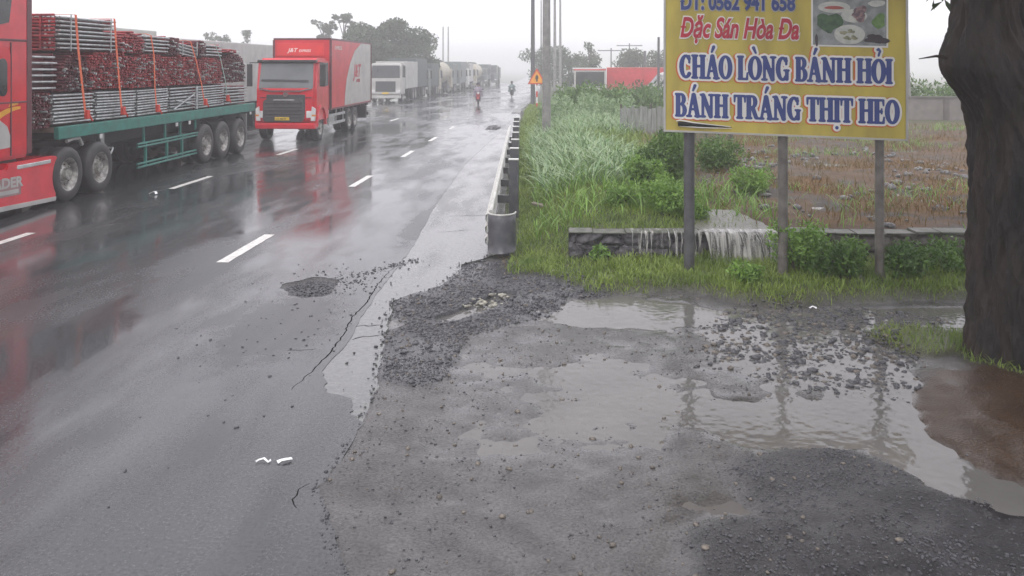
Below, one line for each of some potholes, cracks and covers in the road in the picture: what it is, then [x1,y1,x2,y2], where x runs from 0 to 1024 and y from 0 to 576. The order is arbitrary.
pothole [280,277,339,298]
crack [291,272,389,390]
pothole [435,290,520,322]
